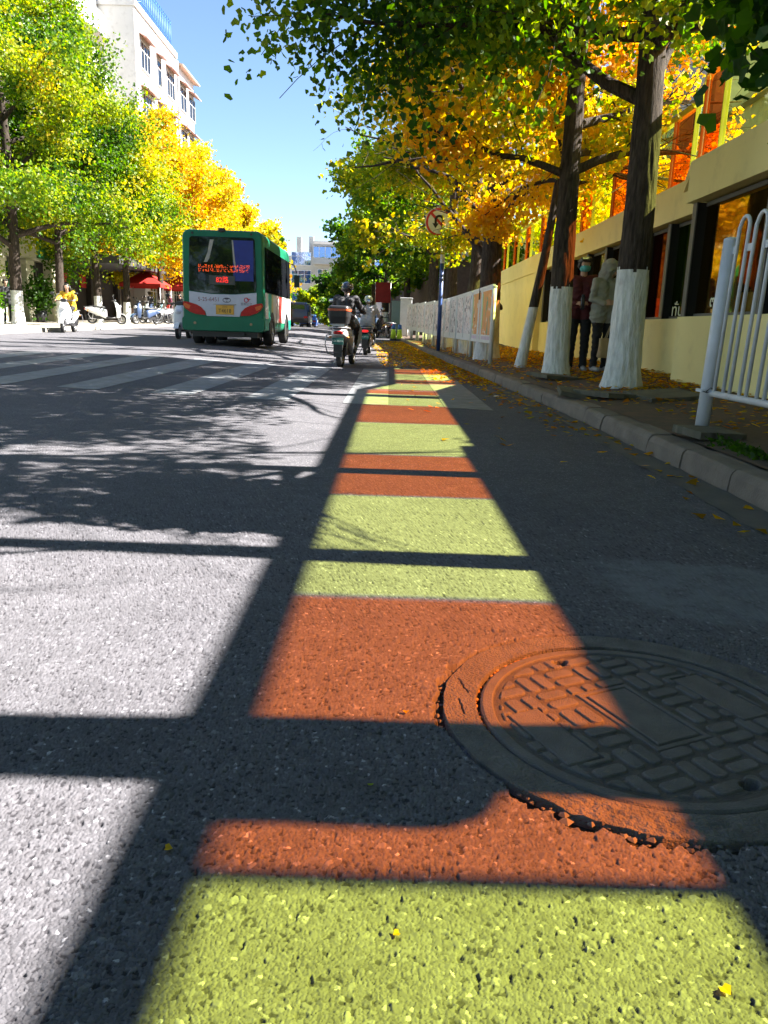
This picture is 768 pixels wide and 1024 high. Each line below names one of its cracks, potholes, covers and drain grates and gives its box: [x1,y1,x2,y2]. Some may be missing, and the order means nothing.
crack [509,793,739,855]
manhole cover [443,636,768,853]
